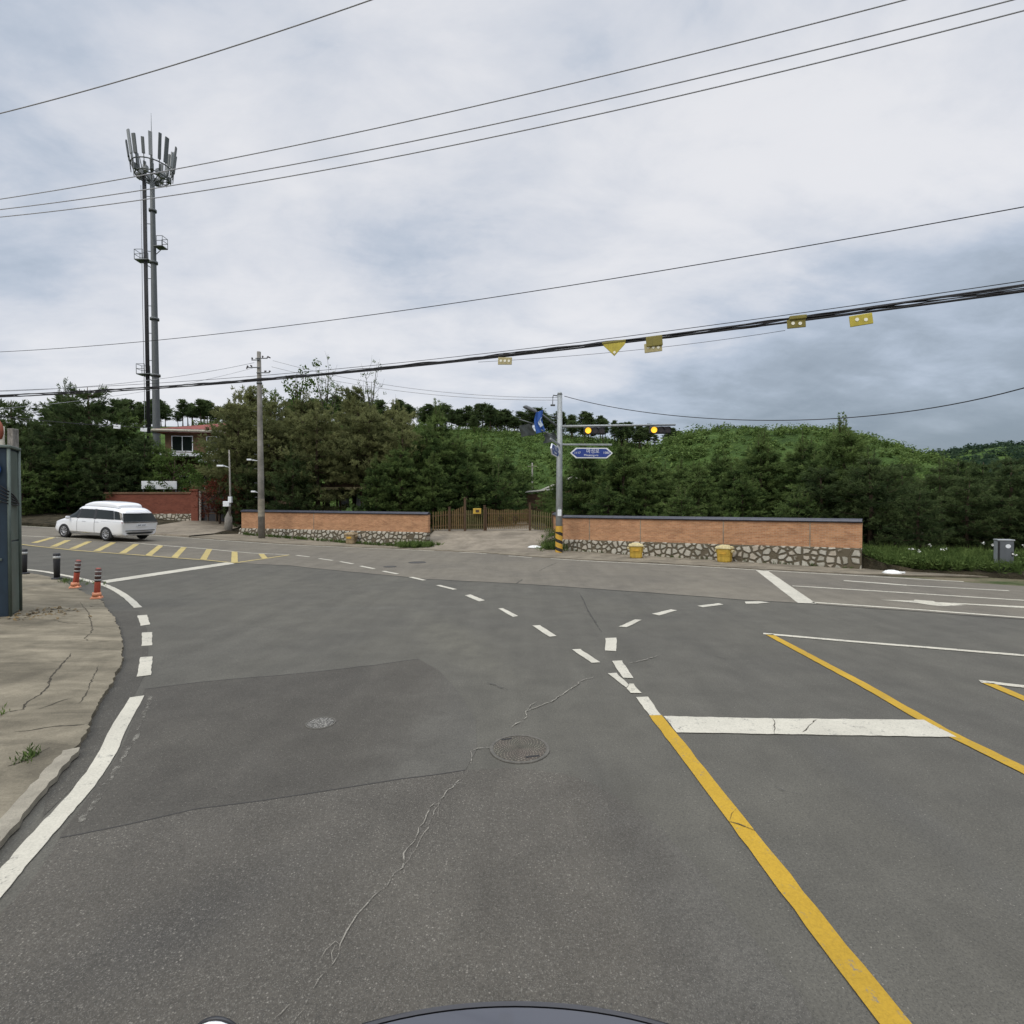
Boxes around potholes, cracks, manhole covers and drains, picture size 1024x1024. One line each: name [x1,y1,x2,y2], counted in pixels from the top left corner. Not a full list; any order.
manhole cover [490,734,550,764]
crack [294,780,459,1020]
crack [5,608,98,713]
crack [513,679,584,726]
manhole cover [305,717,336,729]
